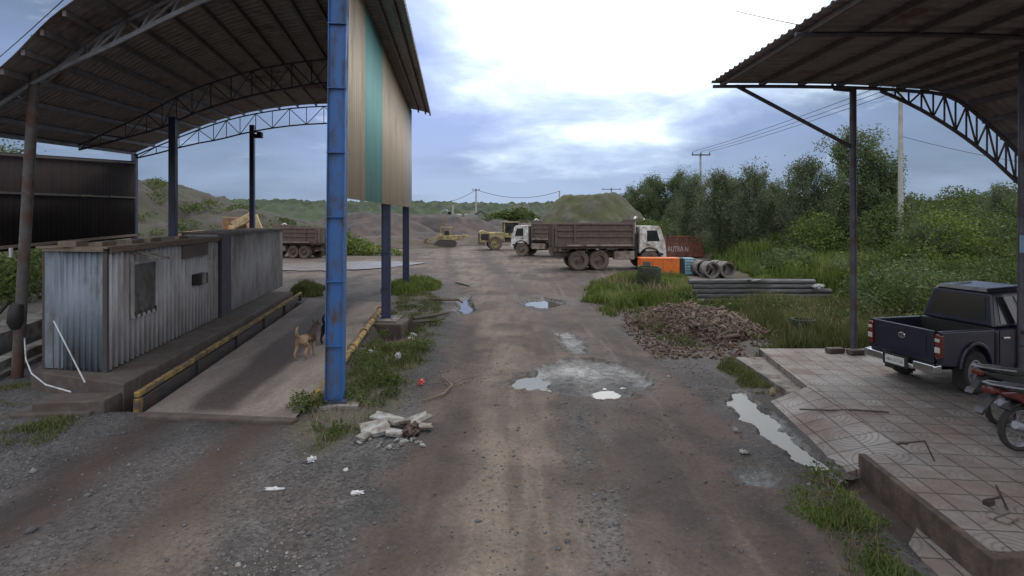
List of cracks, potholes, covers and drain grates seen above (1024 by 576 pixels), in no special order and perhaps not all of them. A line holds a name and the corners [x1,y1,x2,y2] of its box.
pothole [511,297,571,311]
pothole [490,356,669,401]
pothole [444,293,483,315]
